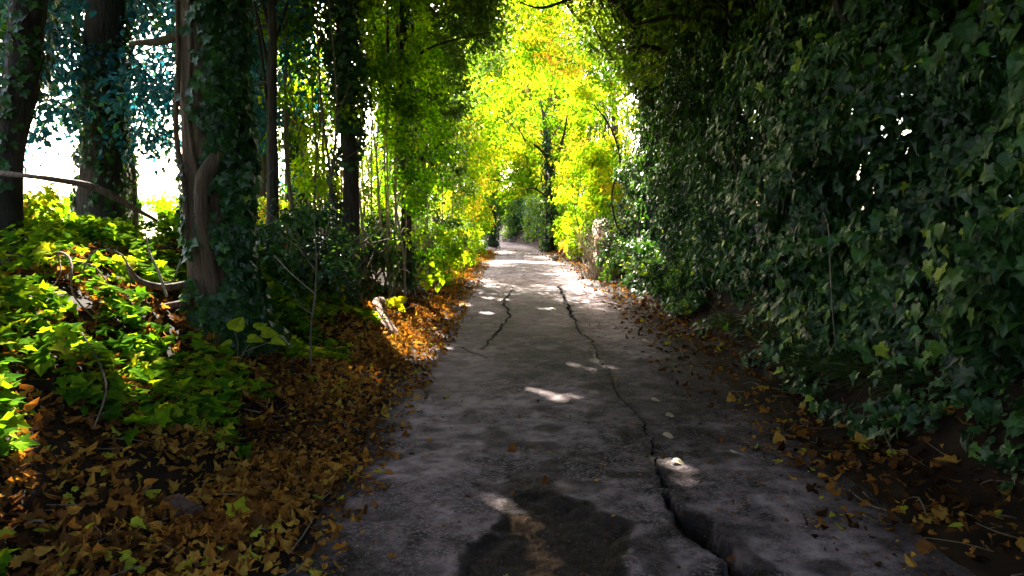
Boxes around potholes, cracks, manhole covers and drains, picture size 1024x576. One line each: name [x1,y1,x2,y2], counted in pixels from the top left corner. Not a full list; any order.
crack [554,286,686,506]
crack [454,346,491,358]
